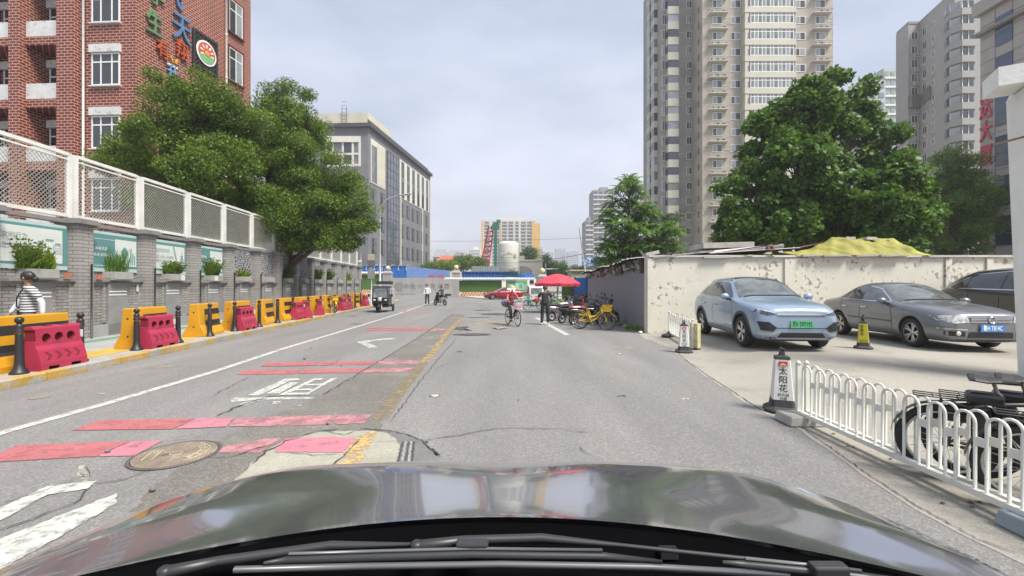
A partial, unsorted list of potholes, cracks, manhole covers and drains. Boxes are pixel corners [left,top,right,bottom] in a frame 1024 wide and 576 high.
manhole cover [125,440,222,471]
